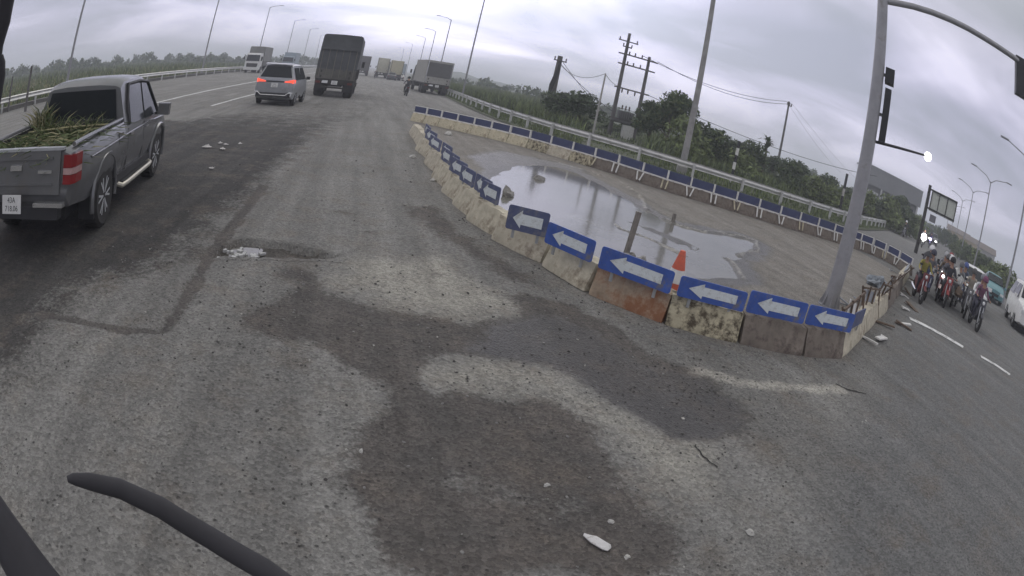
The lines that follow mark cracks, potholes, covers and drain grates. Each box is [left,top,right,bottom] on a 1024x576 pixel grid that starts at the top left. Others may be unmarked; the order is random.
pothole [205,236,347,263]
